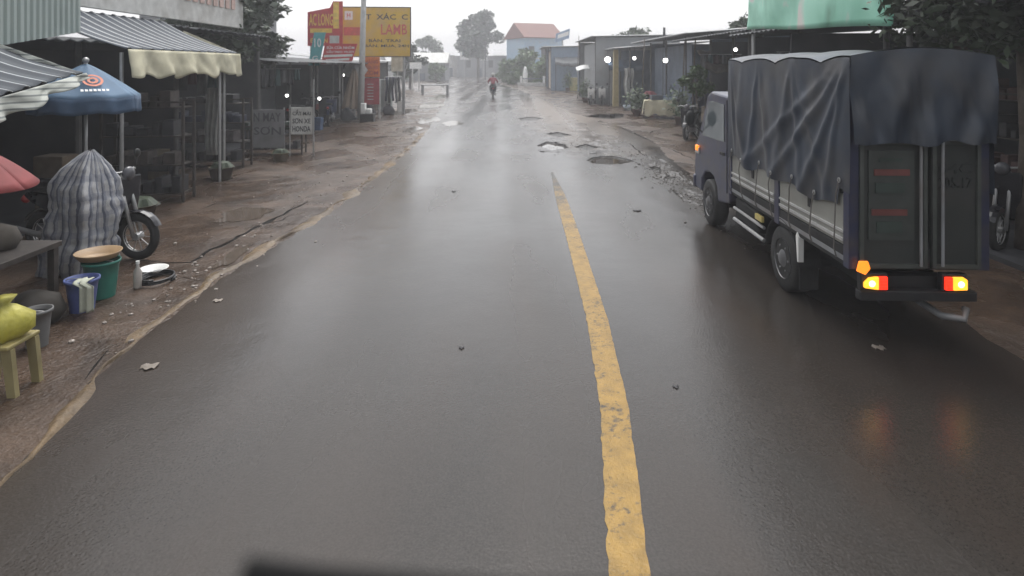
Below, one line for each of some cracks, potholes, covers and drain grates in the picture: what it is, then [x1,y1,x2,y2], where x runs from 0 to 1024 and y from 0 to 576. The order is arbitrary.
pothole [537,141,568,150]
pothole [587,156,634,164]
